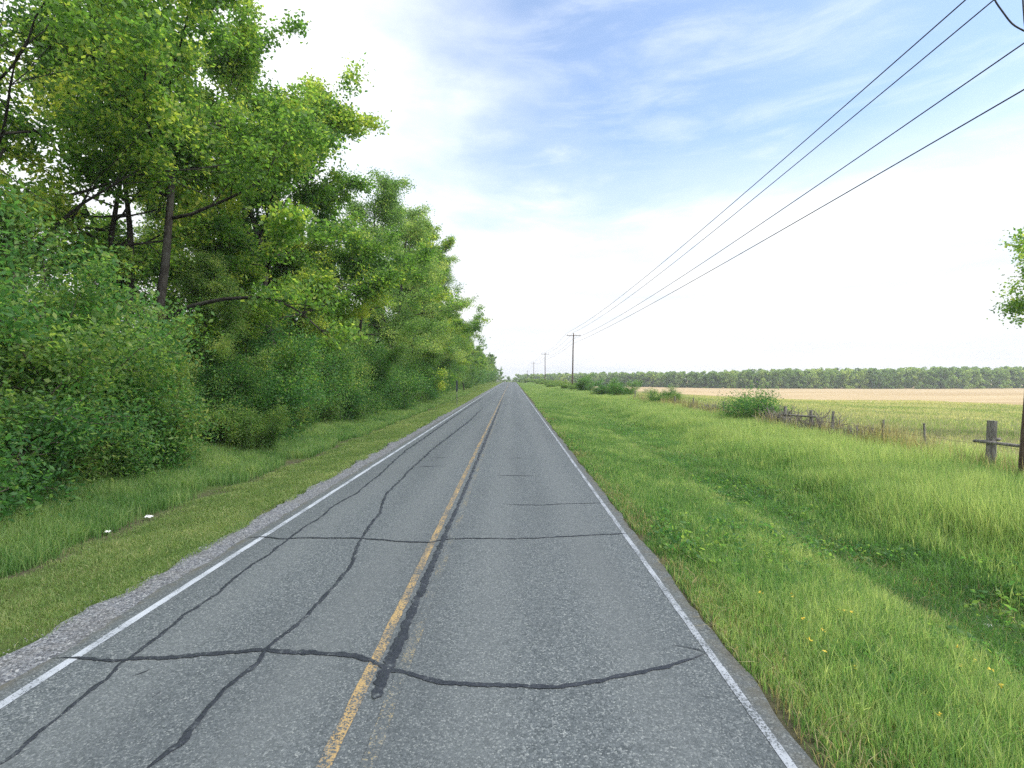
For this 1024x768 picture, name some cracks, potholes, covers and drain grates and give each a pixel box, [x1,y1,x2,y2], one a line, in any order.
crack [52,645,707,689]
crack [247,533,622,542]
